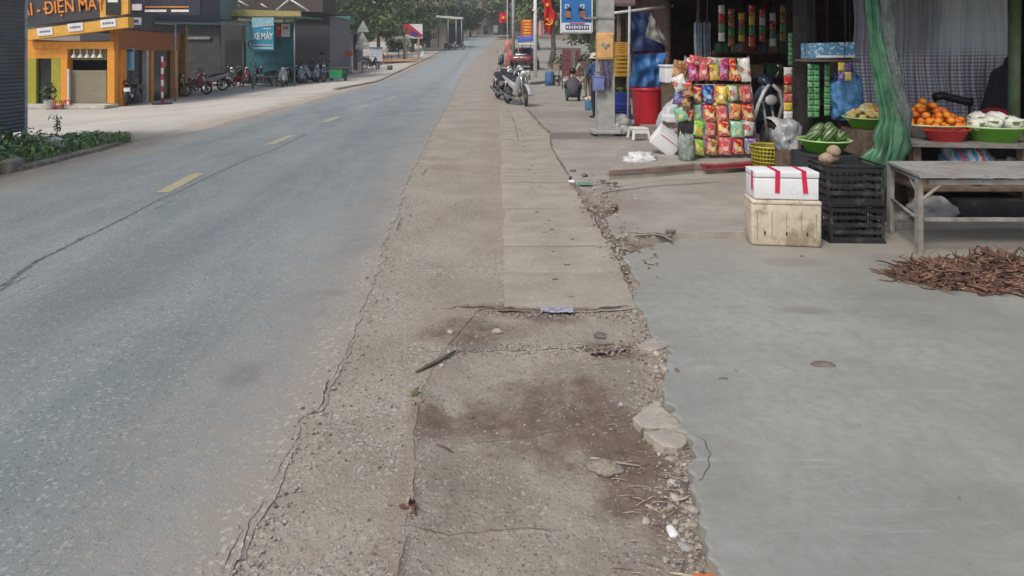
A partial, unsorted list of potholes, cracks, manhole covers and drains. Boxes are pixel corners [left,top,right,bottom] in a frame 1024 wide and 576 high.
crack [693,435,711,481]
pothole [570,342,636,360]
crack [220,340,355,573]
crack [0,275,30,292]
crack [397,523,561,538]
